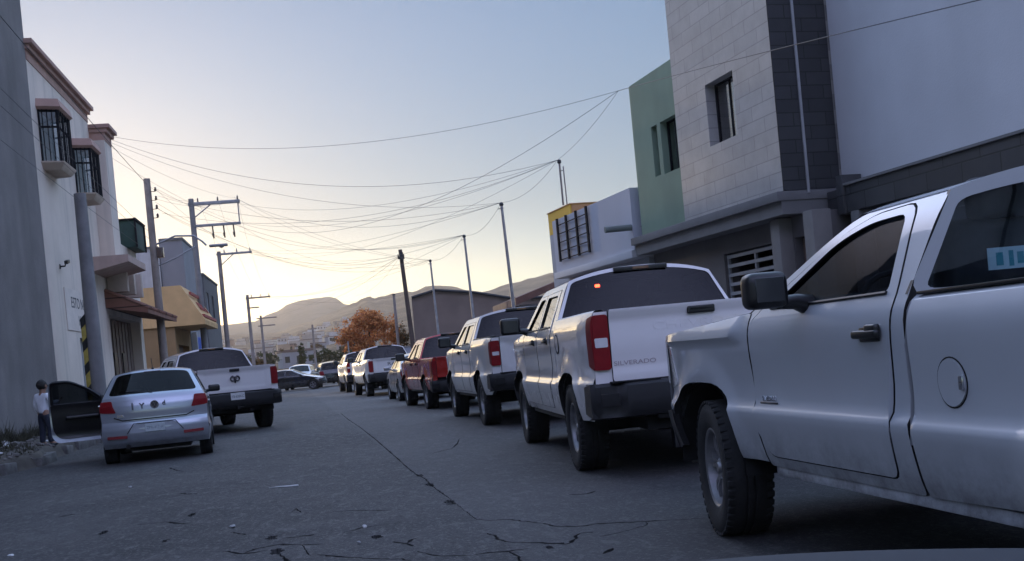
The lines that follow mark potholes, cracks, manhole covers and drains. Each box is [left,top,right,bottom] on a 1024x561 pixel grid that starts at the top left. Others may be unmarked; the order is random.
crack [219,509,697,561]
